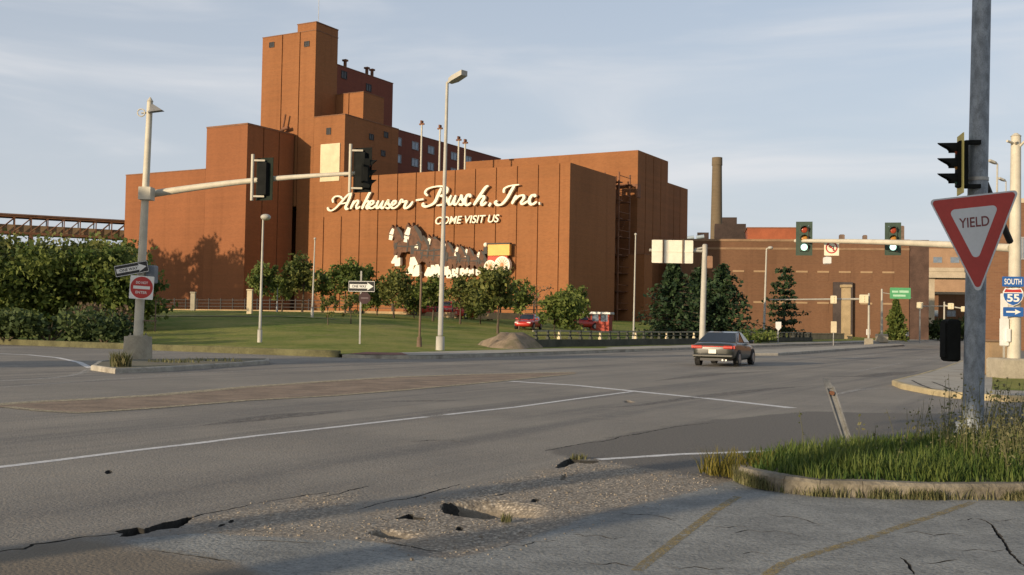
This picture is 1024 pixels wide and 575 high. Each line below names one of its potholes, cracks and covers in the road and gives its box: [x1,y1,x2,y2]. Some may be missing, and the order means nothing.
crack [546,423,706,451]
pothole [440,499,553,520]
pothole [555,458,599,468]
crack [900,518,1024,574]
crack [702,514,820,537]
crack [0,533,124,552]
crack [188,486,368,520]
